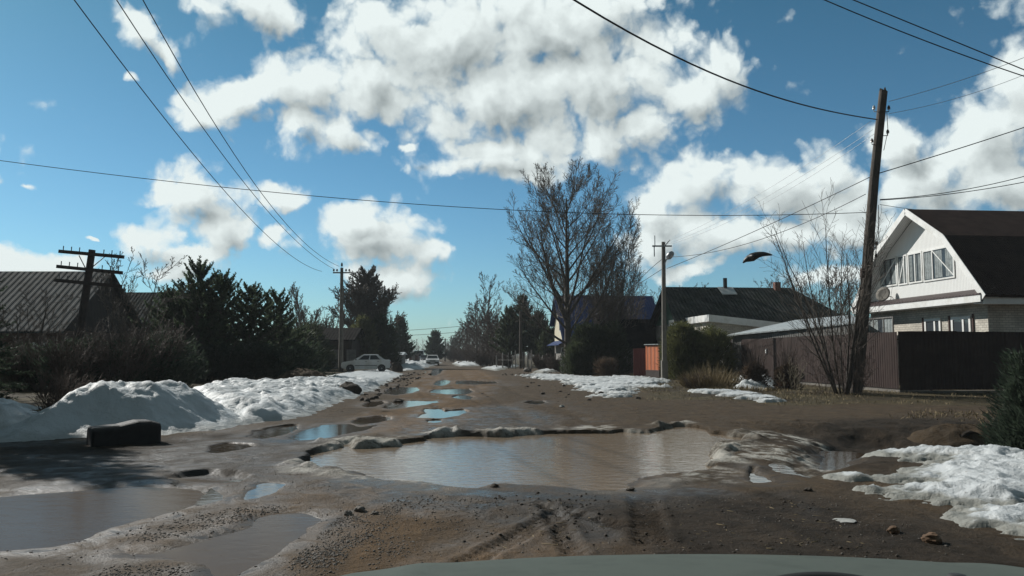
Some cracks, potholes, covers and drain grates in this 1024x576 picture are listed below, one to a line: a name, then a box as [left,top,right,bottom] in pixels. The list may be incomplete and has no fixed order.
pothole [376,399,443,409]
pothole [407,407,473,418]
pothole [381,387,423,395]
pothole [292,420,752,494]
pothole [239,423,304,440]
